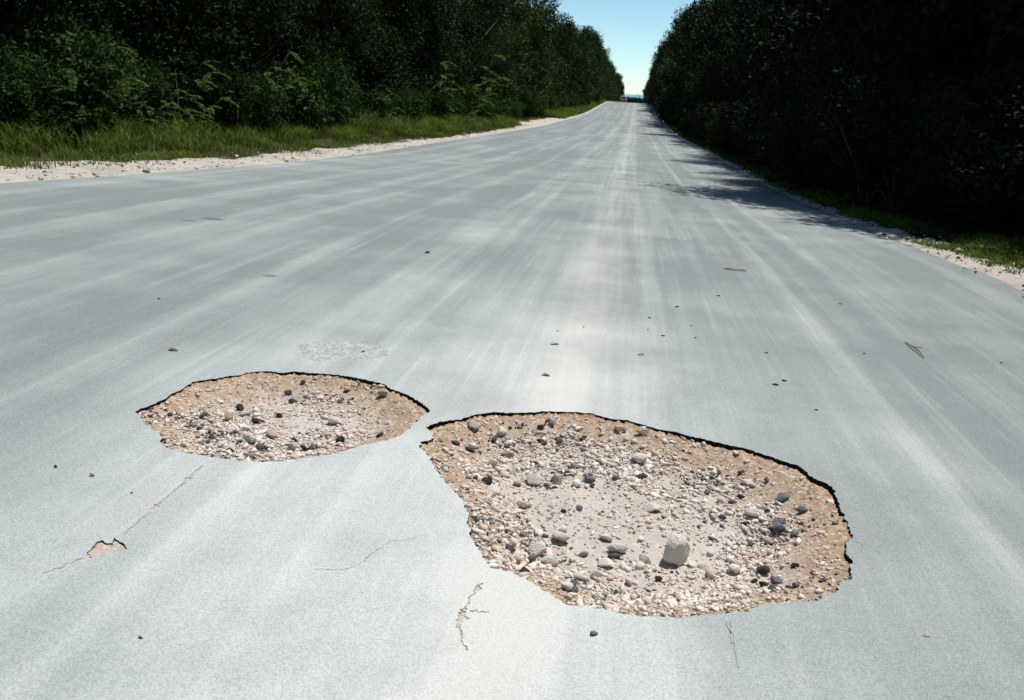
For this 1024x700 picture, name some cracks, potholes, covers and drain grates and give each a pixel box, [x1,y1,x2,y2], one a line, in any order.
pothole [419,411,853,618]
crack [455,583,488,650]
crack [725,621,739,668]
pothole [86,538,127,558]
crack [124,465,203,534]
pothole [136,371,430,462]
